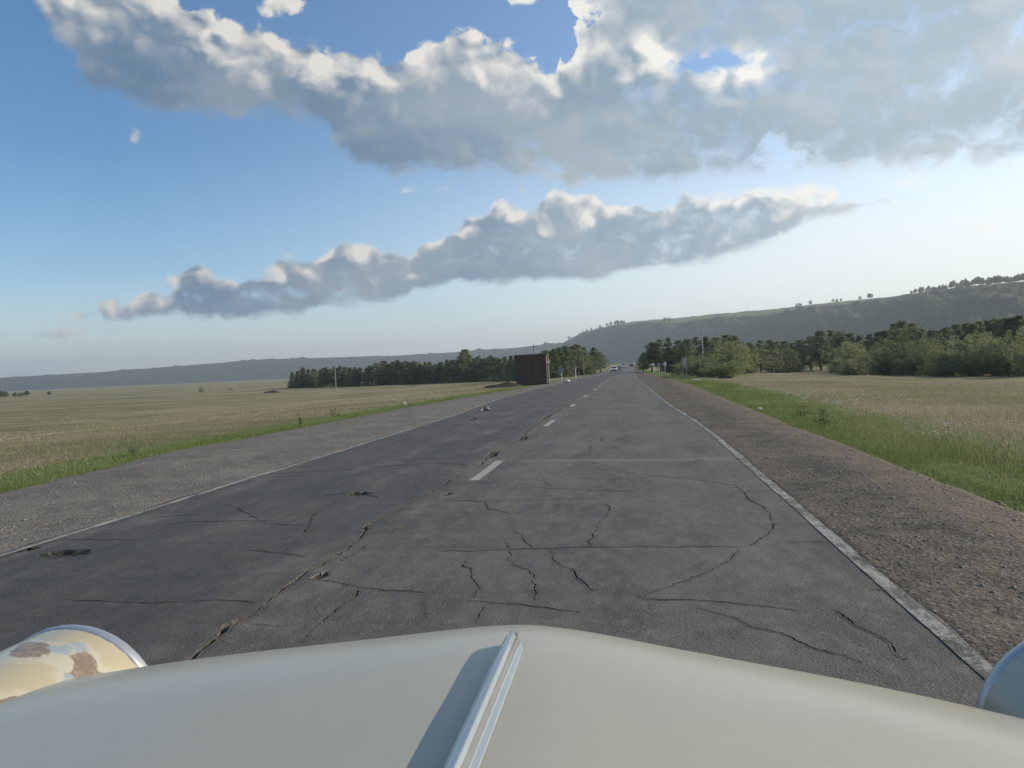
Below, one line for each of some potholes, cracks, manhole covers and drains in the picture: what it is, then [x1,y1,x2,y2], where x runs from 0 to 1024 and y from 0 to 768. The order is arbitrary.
crack [249,469,909,662]
crack [20,569,257,626]
crack [150,492,378,557]
pothole [33,549,94,559]
